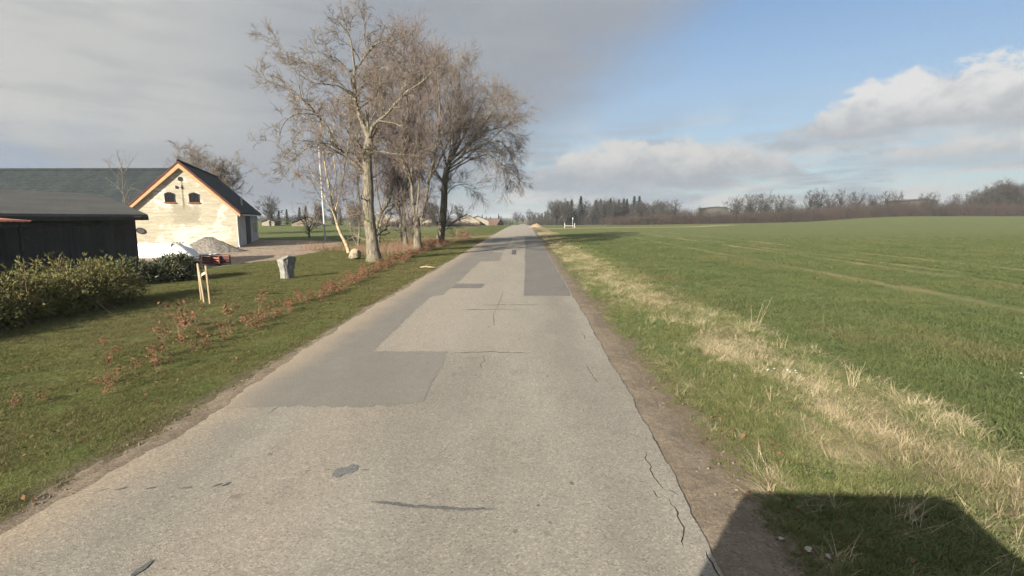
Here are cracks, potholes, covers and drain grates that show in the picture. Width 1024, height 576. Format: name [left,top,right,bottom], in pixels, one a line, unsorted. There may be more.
crack [645,454,685,547]
crack [457,351,523,376]
